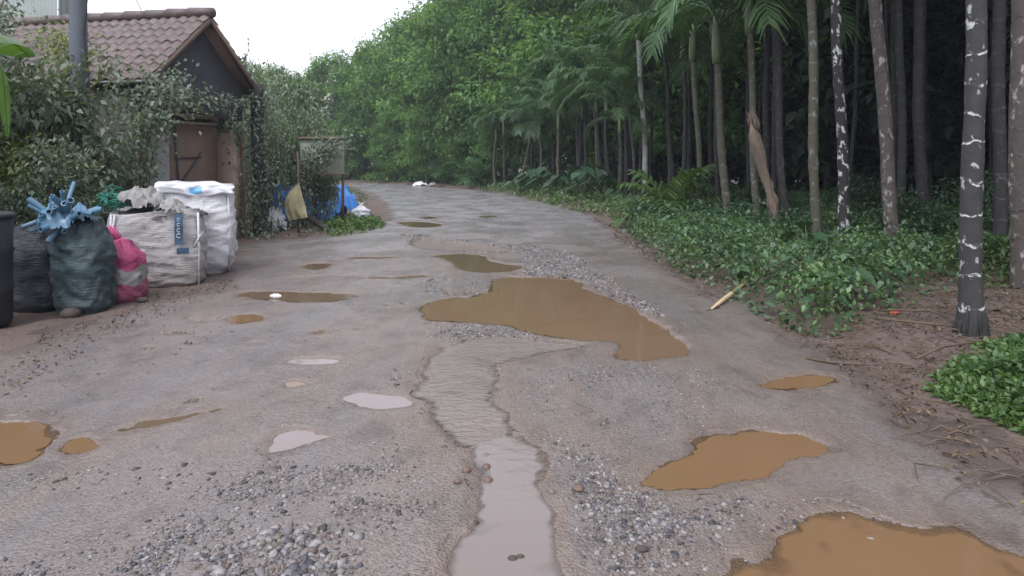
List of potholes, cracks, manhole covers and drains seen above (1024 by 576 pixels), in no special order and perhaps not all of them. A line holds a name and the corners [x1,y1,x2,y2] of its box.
pothole [424,252,531,274]
pothole [620,421,849,502]
pothole [289,260,345,271]
pothole [244,422,354,460]
pothole [222,288,366,305]
pothole [92,401,244,439]
pothole [208,310,278,327]
pothole [397,332,603,453]
pothole [387,220,453,229]
pothole [408,274,709,364]
pothole [740,368,853,396]
